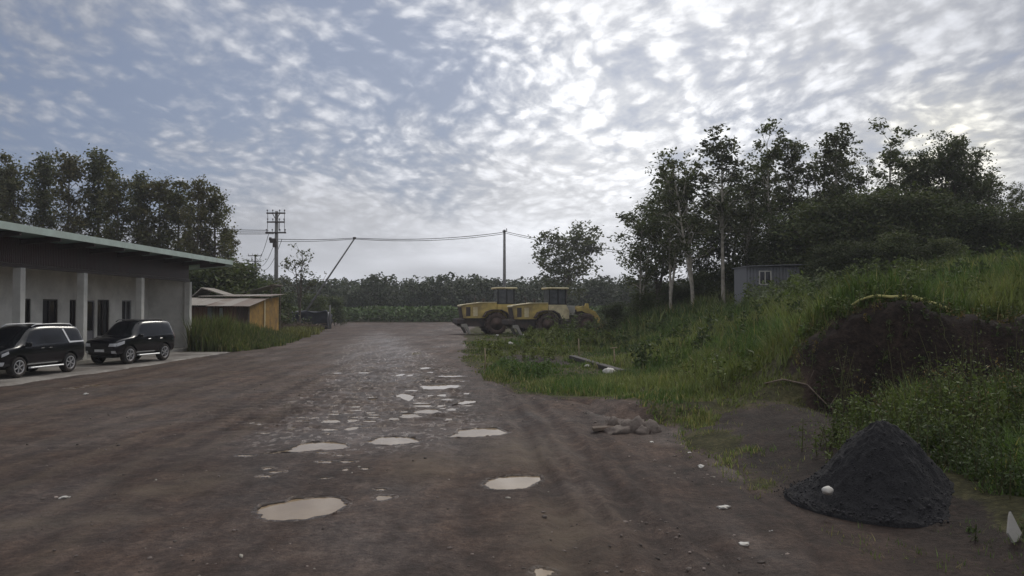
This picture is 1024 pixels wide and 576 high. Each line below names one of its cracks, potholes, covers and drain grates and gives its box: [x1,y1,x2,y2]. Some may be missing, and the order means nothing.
pothole [250,494,353,523]
pothole [394,393,418,402]
pothole [262,440,353,454]
pothole [443,426,512,438]
pothole [363,435,422,446]
pothole [477,474,546,491]
pothole [525,565,562,576]
